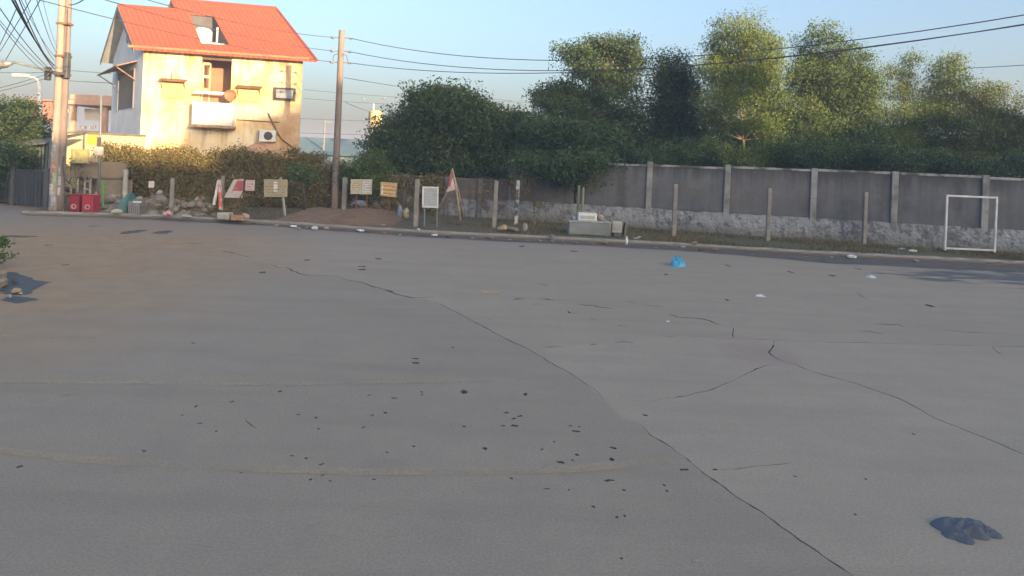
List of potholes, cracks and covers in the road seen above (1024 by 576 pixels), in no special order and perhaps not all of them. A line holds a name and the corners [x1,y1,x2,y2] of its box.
crack [273,265,673,397]
crack [513,284,1024,454]
